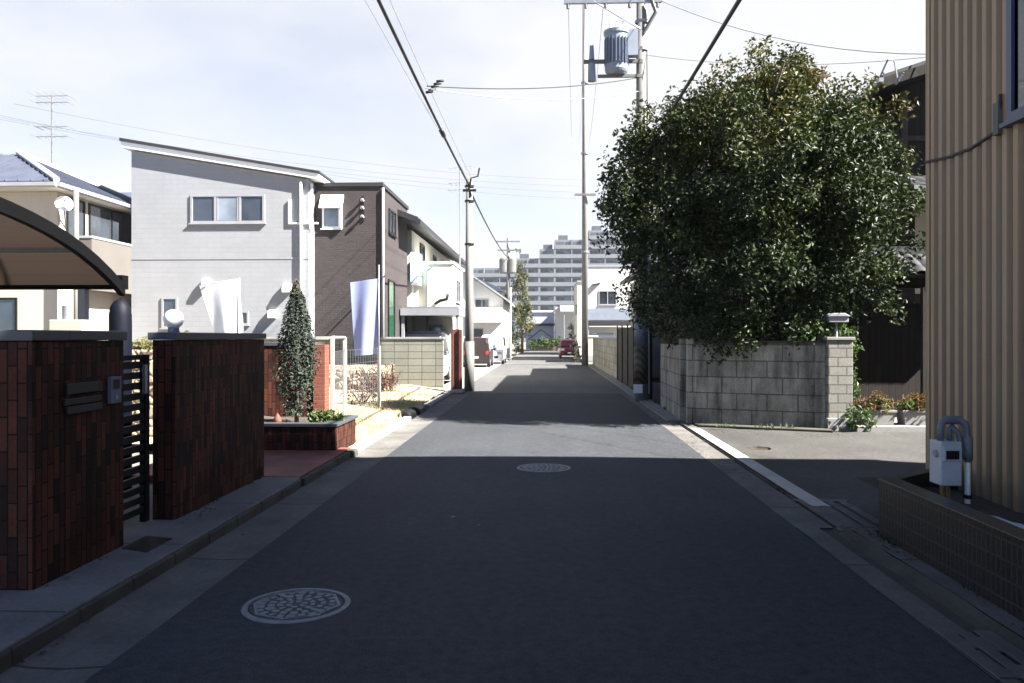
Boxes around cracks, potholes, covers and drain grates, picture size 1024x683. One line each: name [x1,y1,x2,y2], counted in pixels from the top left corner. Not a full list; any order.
utility cover [121,535,172,552]
manhole cover [517,463,571,472]
manhole cover [241,588,351,624]
